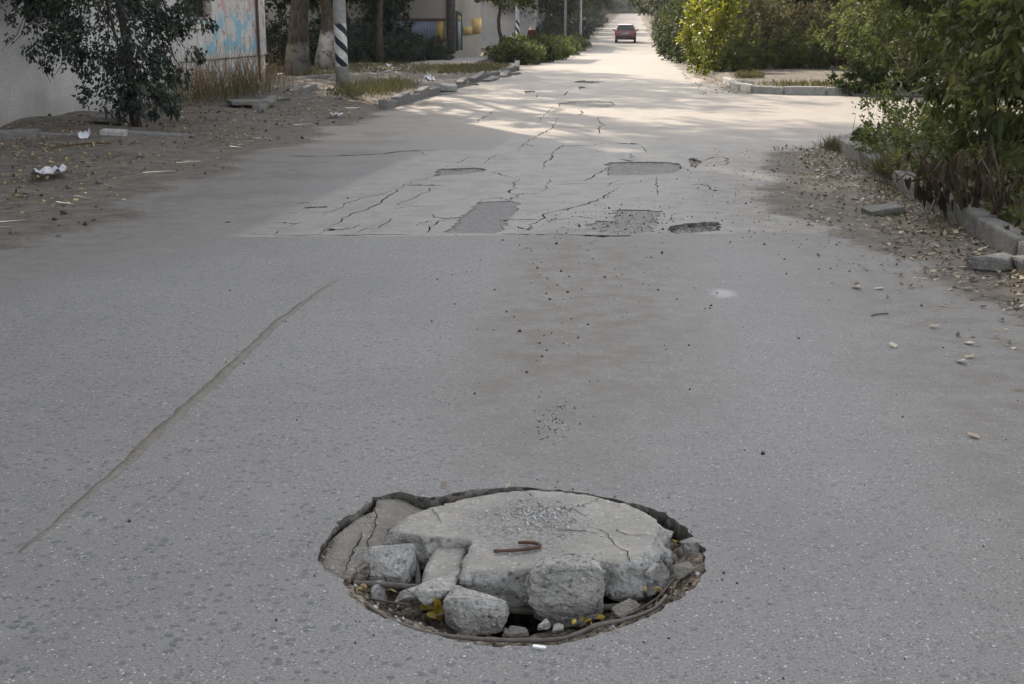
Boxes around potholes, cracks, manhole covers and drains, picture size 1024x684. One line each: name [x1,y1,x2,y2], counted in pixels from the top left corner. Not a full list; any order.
crack [260,90,648,237]
pothole [667,222,722,234]
